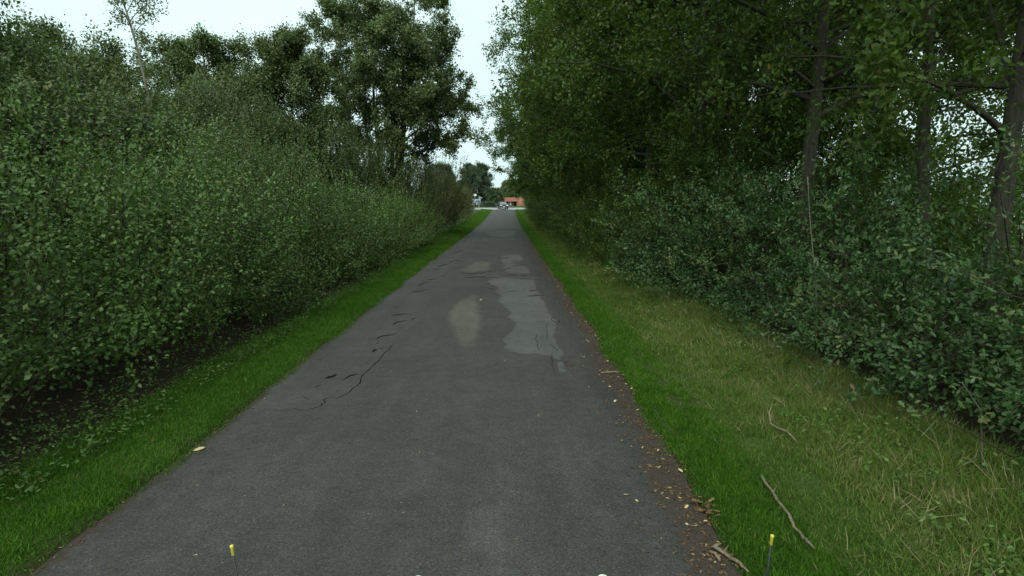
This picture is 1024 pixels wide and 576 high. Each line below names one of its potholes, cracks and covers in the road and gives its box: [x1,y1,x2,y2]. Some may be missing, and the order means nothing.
crack [273,237,545,411]
